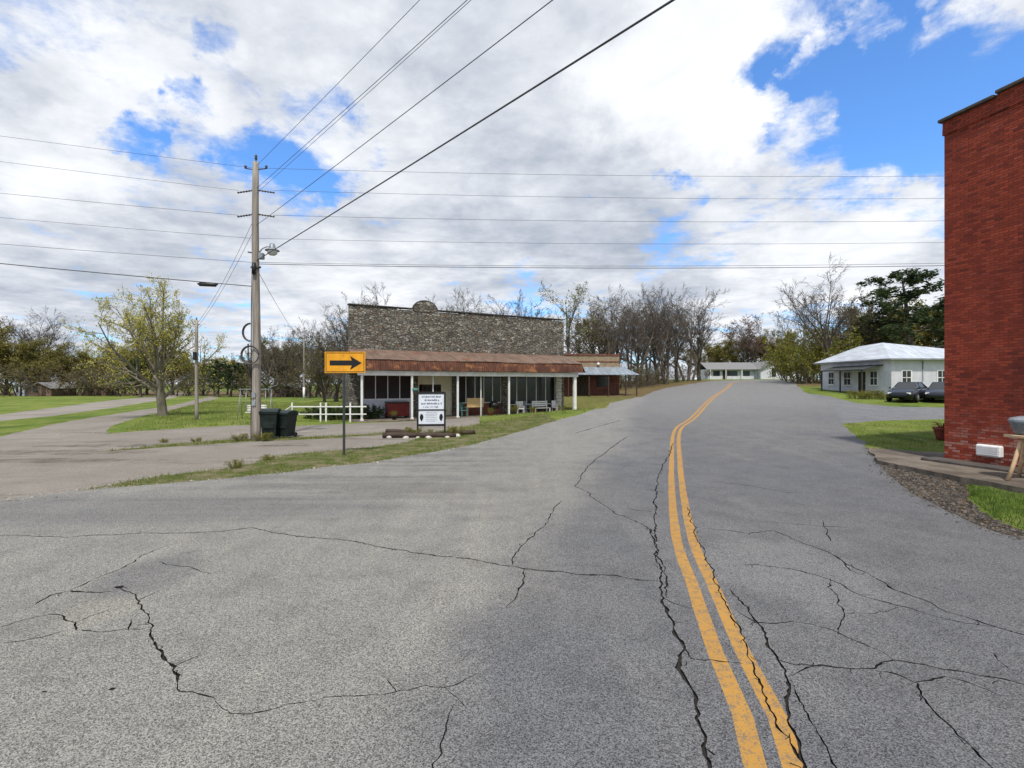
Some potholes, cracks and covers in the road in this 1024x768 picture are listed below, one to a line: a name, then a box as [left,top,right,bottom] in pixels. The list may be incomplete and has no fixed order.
crack [0,420,1024,768]
